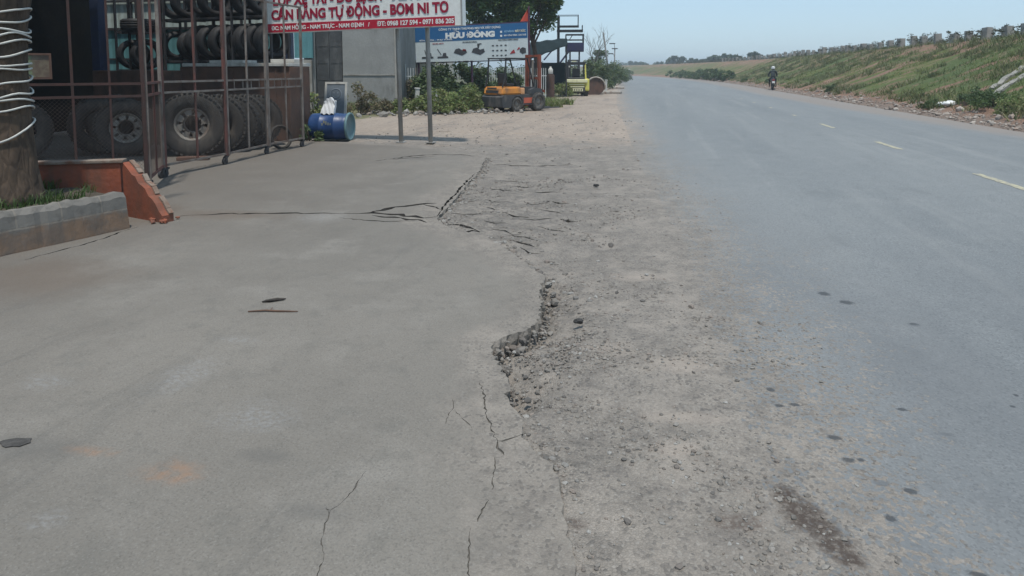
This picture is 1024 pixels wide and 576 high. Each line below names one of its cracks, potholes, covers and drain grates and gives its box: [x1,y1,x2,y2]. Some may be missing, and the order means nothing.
pothole [494,281,601,421]
crack [184,175,473,222]
crack [446,383,523,576]
crack [26,227,137,260]
crack [317,471,366,576]
